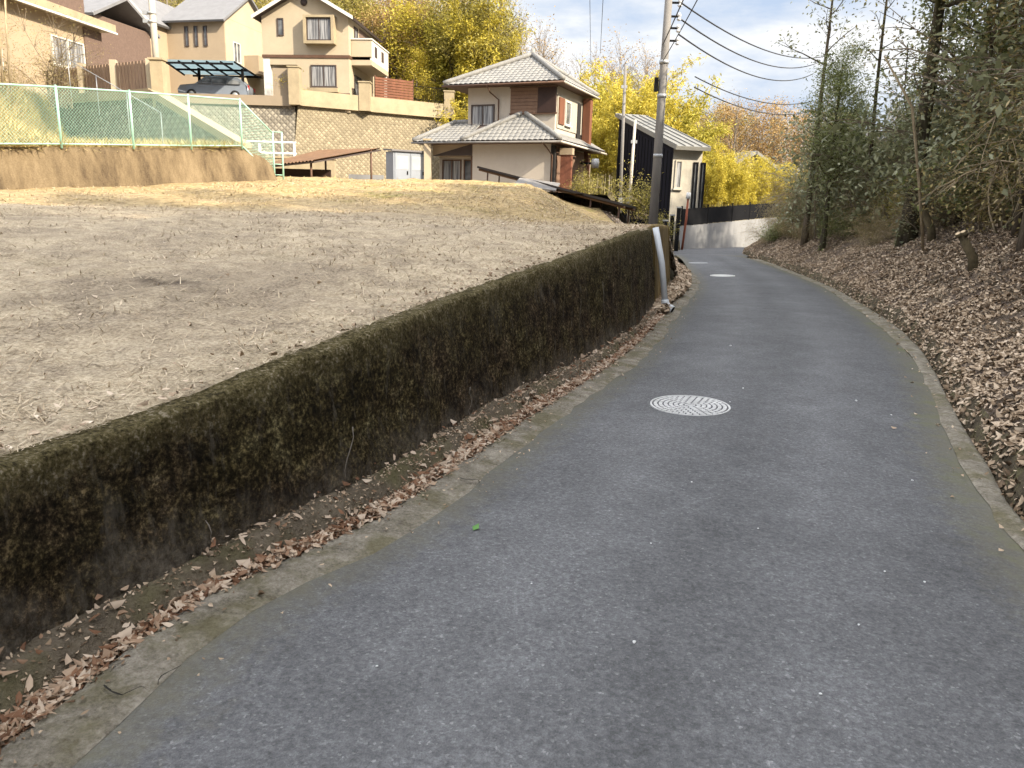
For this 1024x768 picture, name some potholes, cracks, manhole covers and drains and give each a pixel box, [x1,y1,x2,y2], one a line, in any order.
manhole cover [650,395,731,416]
